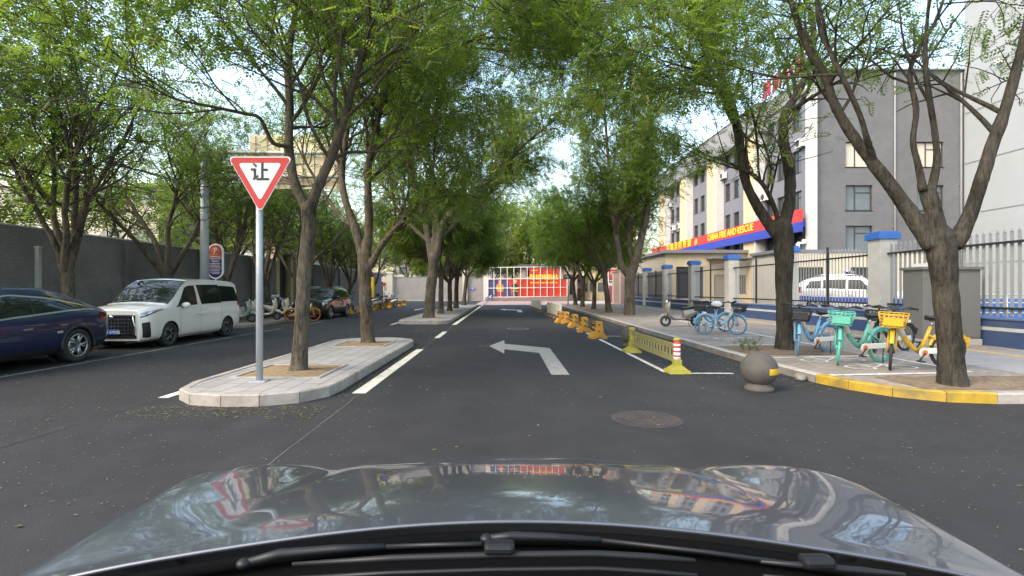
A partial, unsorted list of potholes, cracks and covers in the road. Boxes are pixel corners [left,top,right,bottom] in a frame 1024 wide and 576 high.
manhole cover [611,411,684,428]
